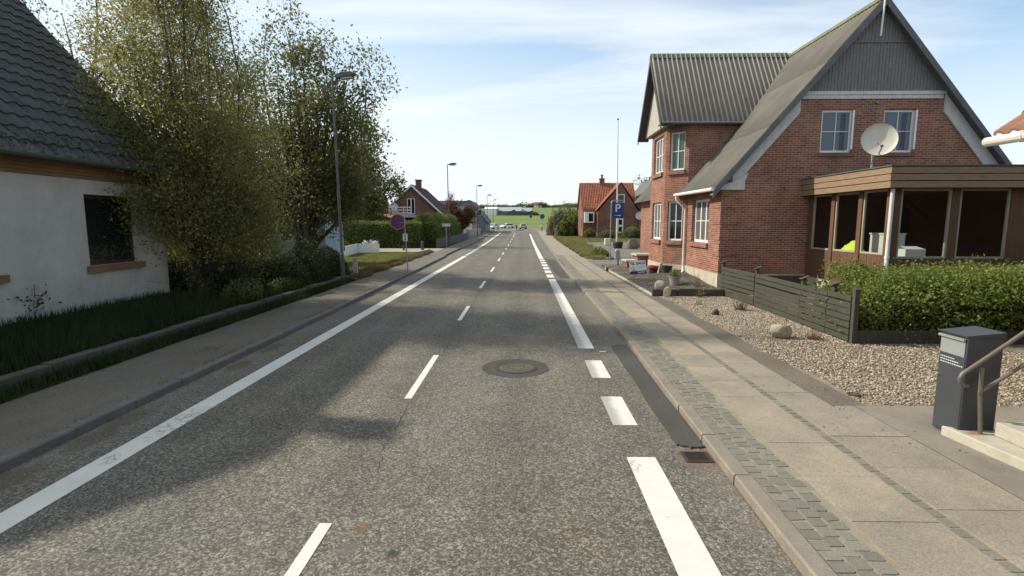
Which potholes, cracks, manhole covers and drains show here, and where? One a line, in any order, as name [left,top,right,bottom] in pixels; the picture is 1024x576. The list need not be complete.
drain grate [680,451,714,463]
manhole cover [482,359,549,378]
